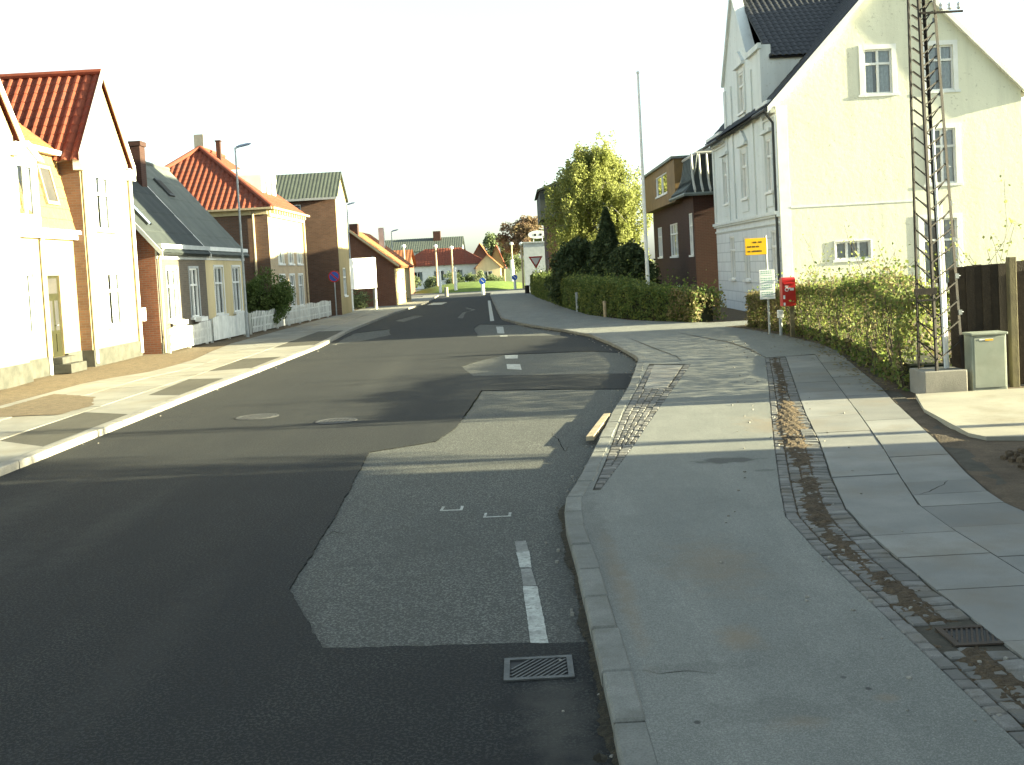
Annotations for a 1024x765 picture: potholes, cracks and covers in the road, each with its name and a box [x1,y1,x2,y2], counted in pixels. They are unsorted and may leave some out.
drain grate [504,654,575,682]
drain grate [934,625,1004,647]
